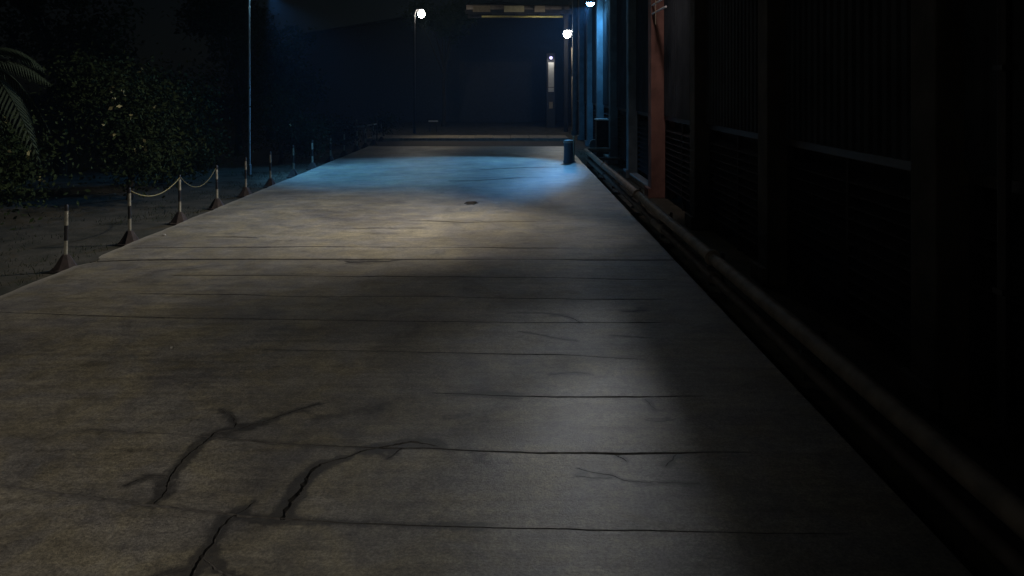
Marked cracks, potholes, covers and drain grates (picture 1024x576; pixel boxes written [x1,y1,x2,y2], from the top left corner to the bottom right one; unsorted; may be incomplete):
crack [129,404,317,576]
crack [576,454,695,484]
crack [280,441,436,520]
